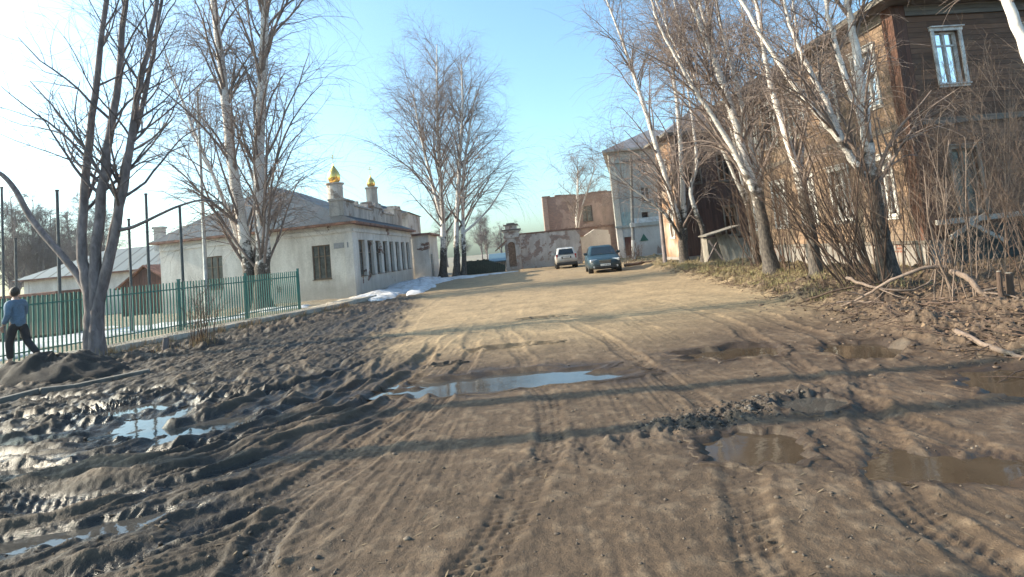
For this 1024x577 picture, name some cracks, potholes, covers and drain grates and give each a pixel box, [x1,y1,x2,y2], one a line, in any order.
pothole [931,357,1024,402]
pothole [349,361,667,404]
pothole [683,423,830,472]
pothole [662,341,795,362]
pothole [808,337,926,362]
